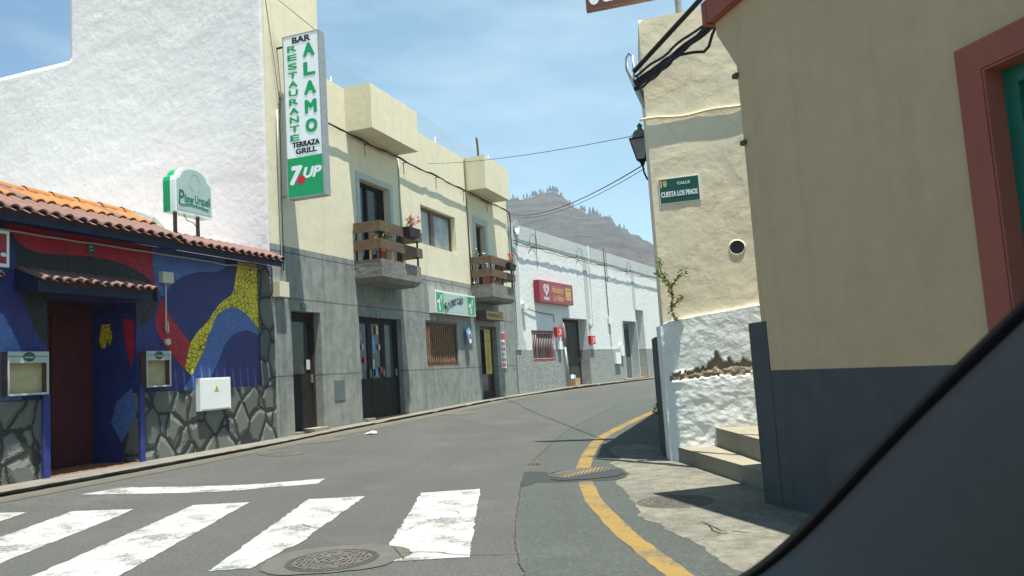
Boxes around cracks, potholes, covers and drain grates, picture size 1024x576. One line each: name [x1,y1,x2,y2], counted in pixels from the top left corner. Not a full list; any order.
manhole cover [260,543,412,575]
crack [701,521,749,534]
